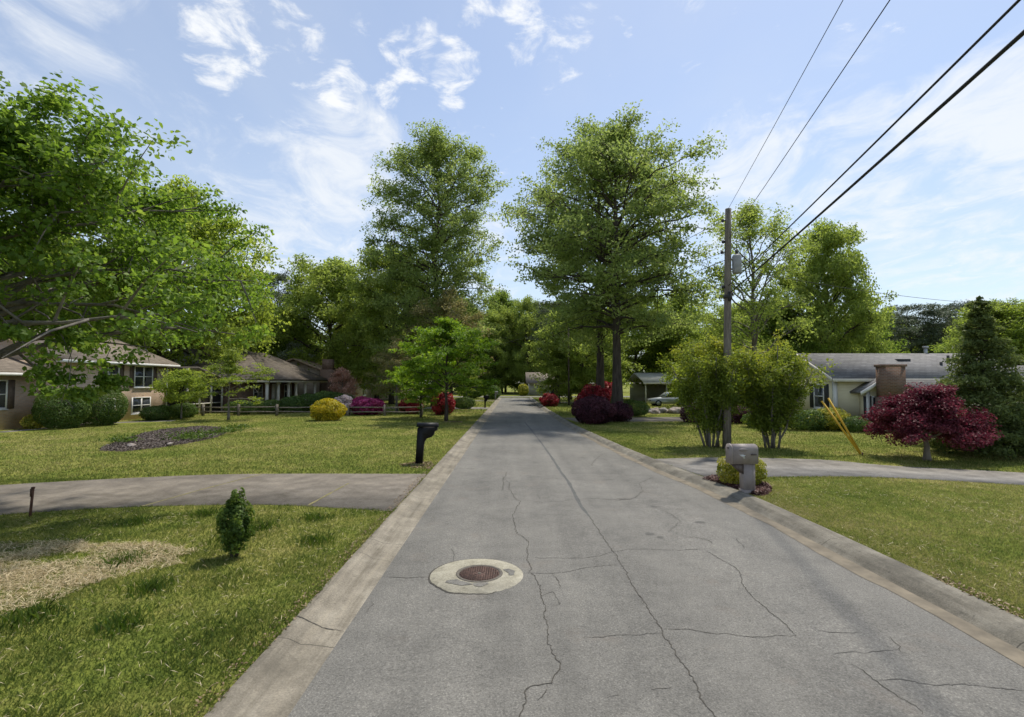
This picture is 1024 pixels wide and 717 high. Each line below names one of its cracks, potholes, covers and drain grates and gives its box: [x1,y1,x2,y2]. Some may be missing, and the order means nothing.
crack [502,475,795,717]
manhole cover [428,559,523,595]
crack [835,636,1024,714]
